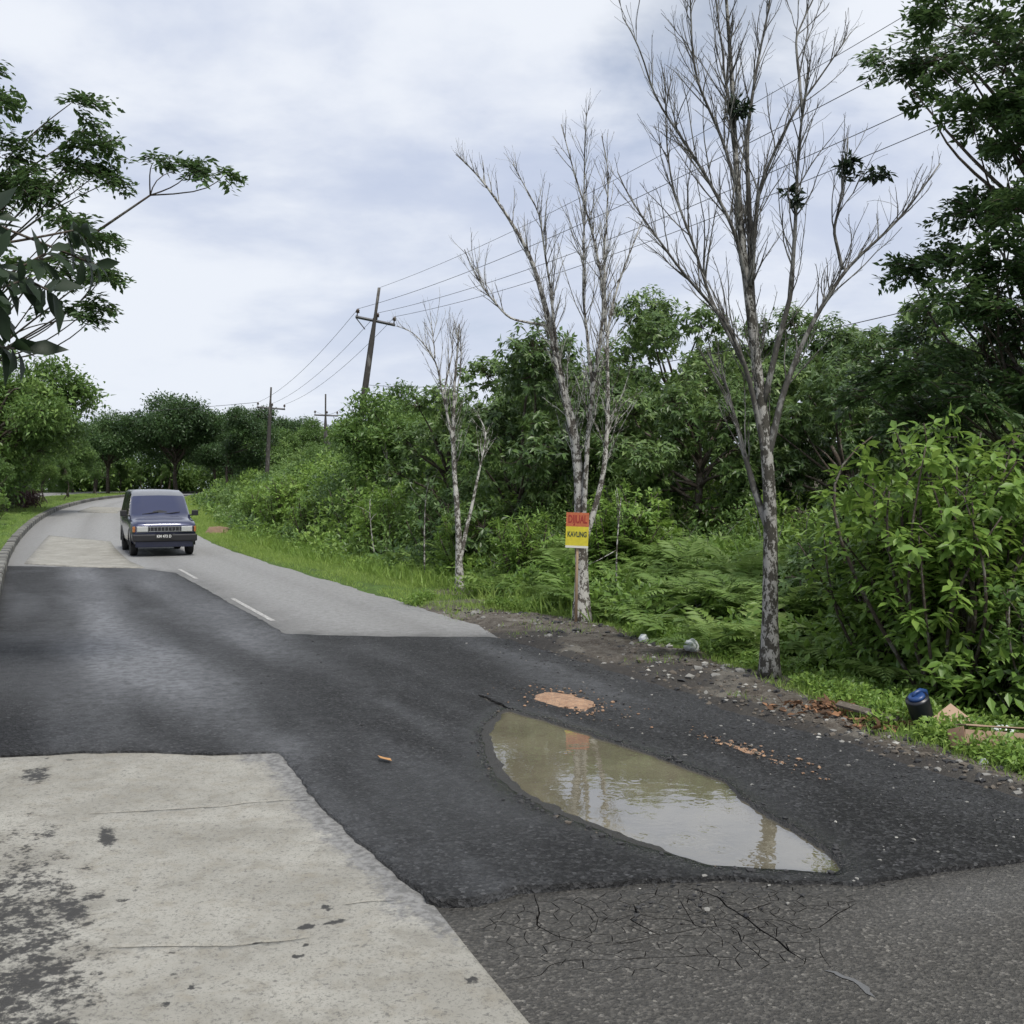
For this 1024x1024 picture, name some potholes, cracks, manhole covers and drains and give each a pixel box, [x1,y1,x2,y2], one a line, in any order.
pothole [481,709,841,869]
crack [475,885,860,980]
